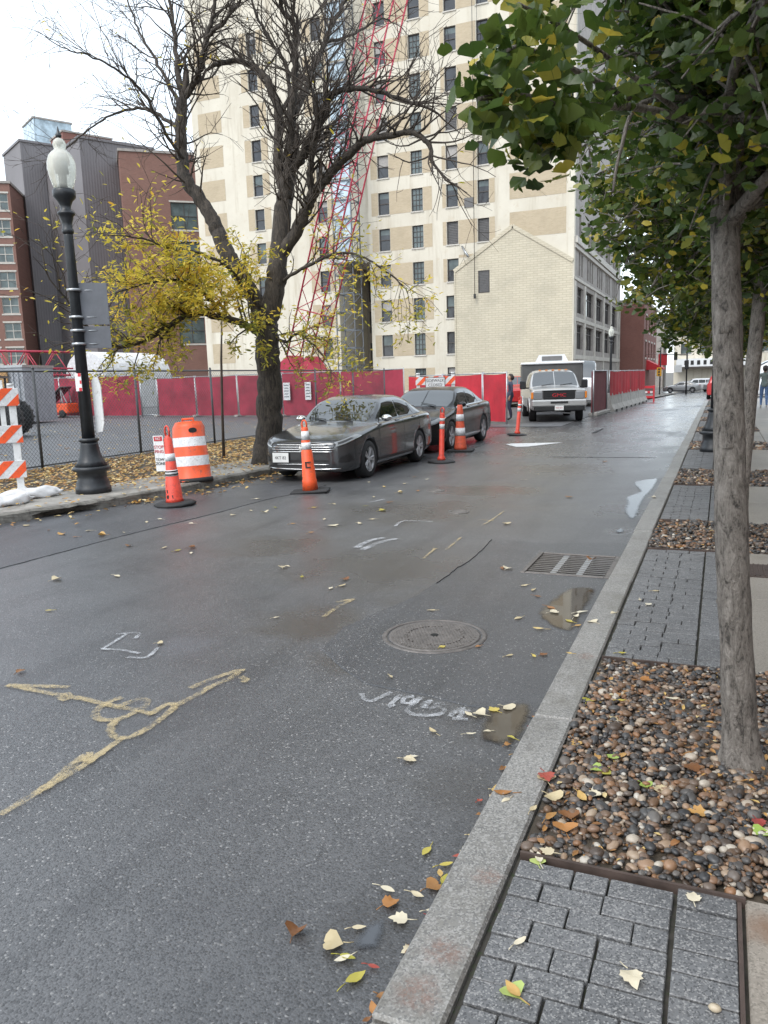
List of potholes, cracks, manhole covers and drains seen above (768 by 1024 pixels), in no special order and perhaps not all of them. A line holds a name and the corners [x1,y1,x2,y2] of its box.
manhole cover [382,619,487,654]
drain grate [520,552,621,579]
